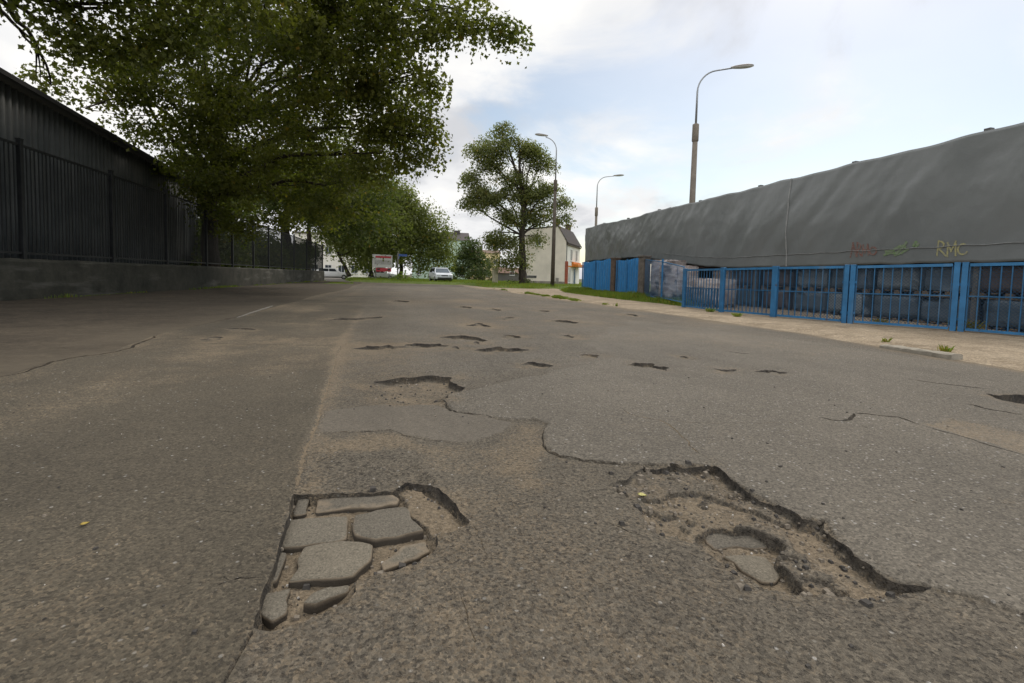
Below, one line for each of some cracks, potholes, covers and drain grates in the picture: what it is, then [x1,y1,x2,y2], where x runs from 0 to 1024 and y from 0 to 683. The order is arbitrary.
crack [2,335,157,377]
pothole [629,363,669,371]
crack [443,400,492,418]
pothole [254,482,470,631]
pothole [354,343,449,352]
pothole [369,375,465,404]
pothole [612,463,932,601]
crack [814,413,1020,454]
crack [541,426,640,465]
crack [905,378,1022,415]
pothole [988,394,1024,404]
crack [338,429,438,441]
